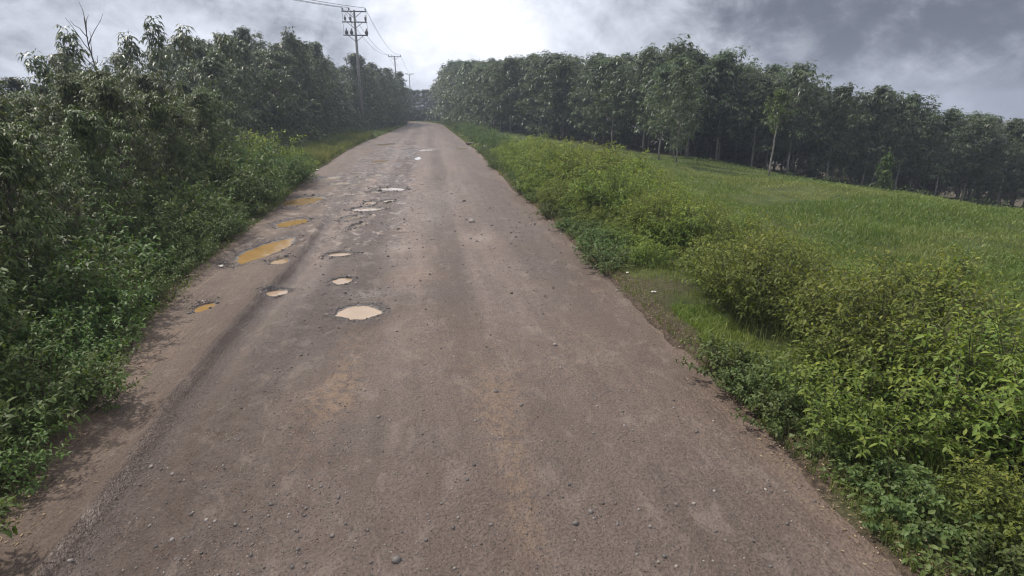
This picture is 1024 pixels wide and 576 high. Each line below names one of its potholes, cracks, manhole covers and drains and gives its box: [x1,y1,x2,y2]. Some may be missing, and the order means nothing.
pothole [281,196,325,206]
pothole [191,302,217,313]
pothole [232,237,296,264]
pothole [273,218,309,228]
pothole [261,286,289,296]
pothole [331,277,353,285]
pothole [333,304,384,320]
